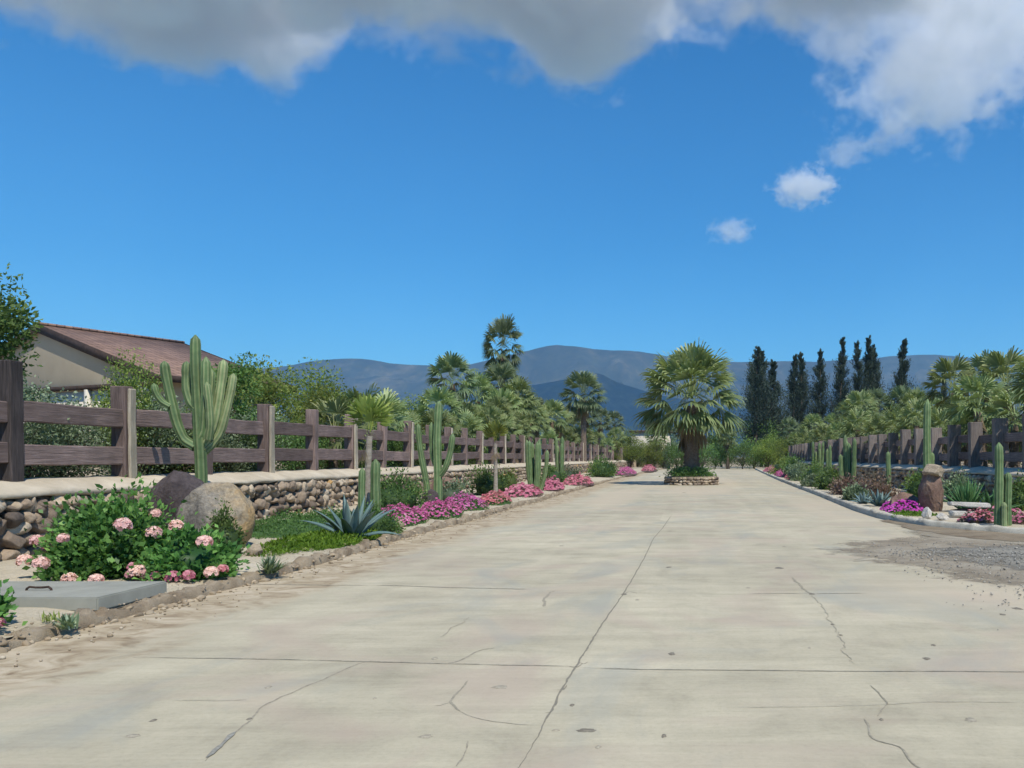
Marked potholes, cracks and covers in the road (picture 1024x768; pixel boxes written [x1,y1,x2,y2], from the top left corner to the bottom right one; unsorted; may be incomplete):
manhole cover [0,581,167,611]
crack [864,686,920,768]
crack [792,577,855,664]
crack [435,518,670,768]
crack [205,662,363,761]
